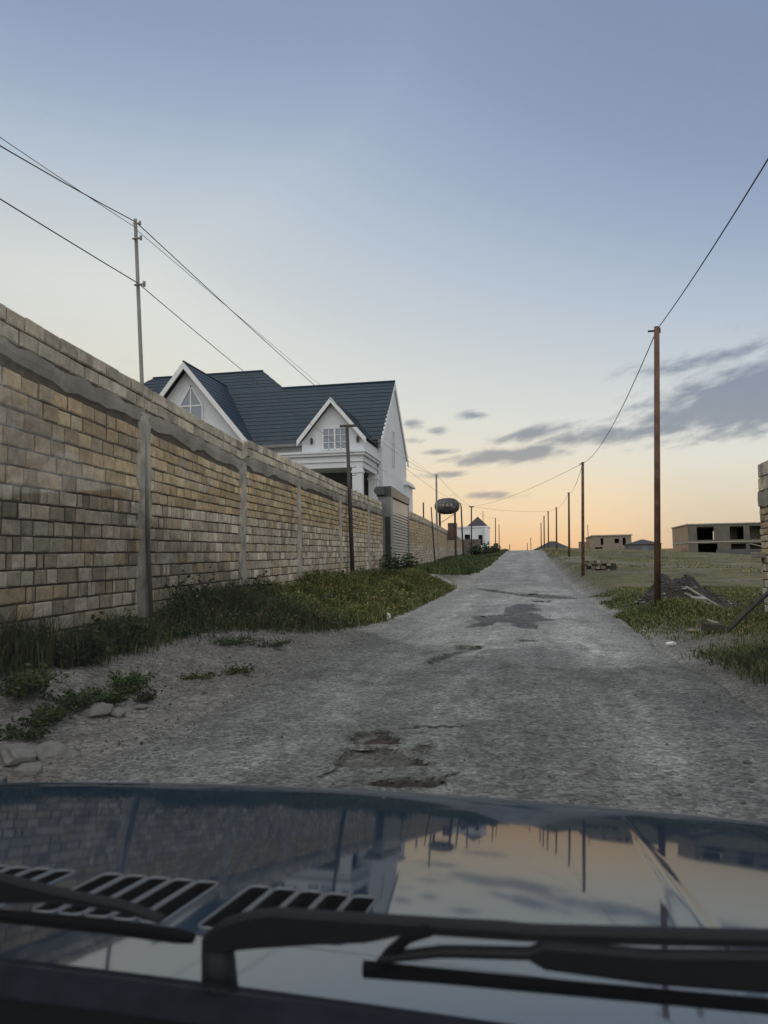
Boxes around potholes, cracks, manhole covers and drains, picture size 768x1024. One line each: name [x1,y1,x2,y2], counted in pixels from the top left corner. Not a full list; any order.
pothole [341,729,410,750]
pothole [358,776,452,792]
pothole [301,739,445,784]
